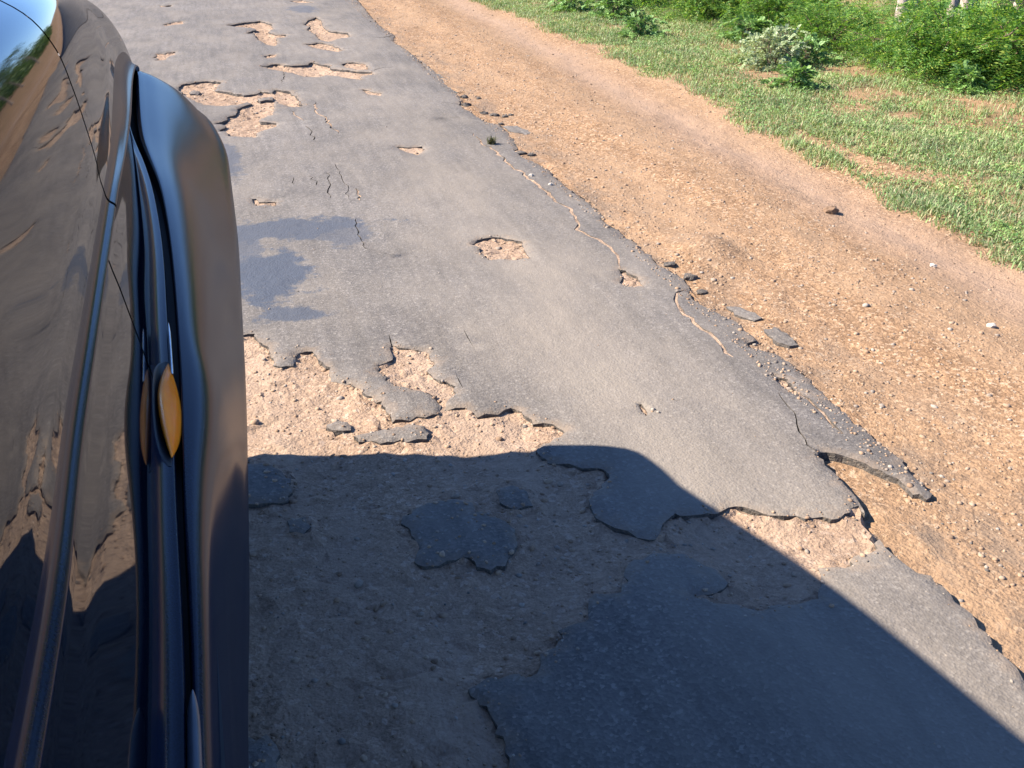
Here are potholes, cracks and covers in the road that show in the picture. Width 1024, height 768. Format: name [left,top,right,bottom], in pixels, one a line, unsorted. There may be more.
pothole [178,81,303,138]
pothole [244,334,878,768]
pothole [304,17,350,42]
crack [778,392,844,452]
pothole [471,237,529,260]
pothole [397,147,425,155]
crack [292,164,361,200]
pothole [619,269,642,287]
pothole [306,43,343,52]
pothole [262,62,374,80]
pothole [230,21,286,46]
crack [473,133,621,268]
